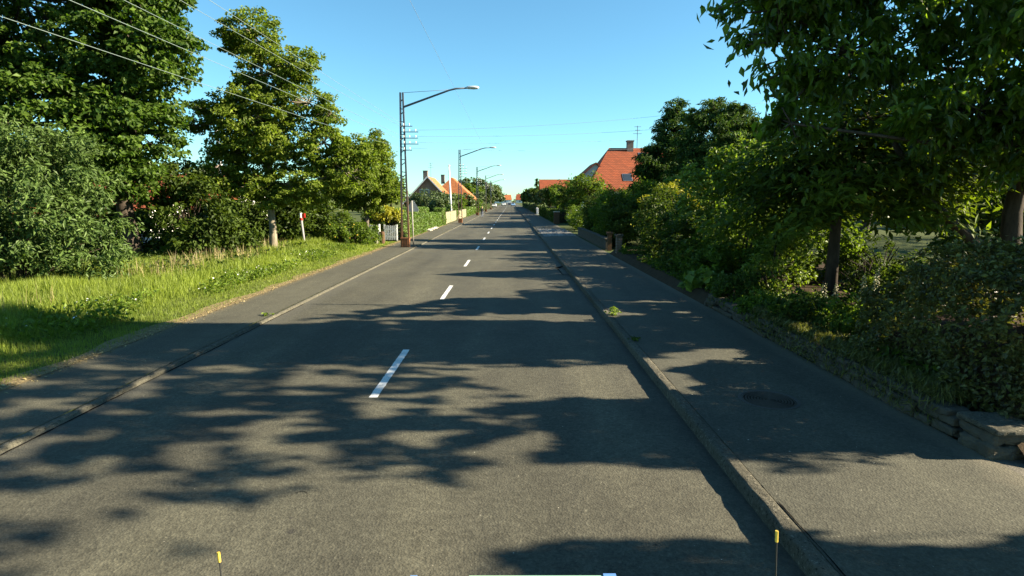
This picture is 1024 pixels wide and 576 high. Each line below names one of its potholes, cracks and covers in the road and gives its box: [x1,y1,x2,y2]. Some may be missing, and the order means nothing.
manhole cover [738,390,801,410]
